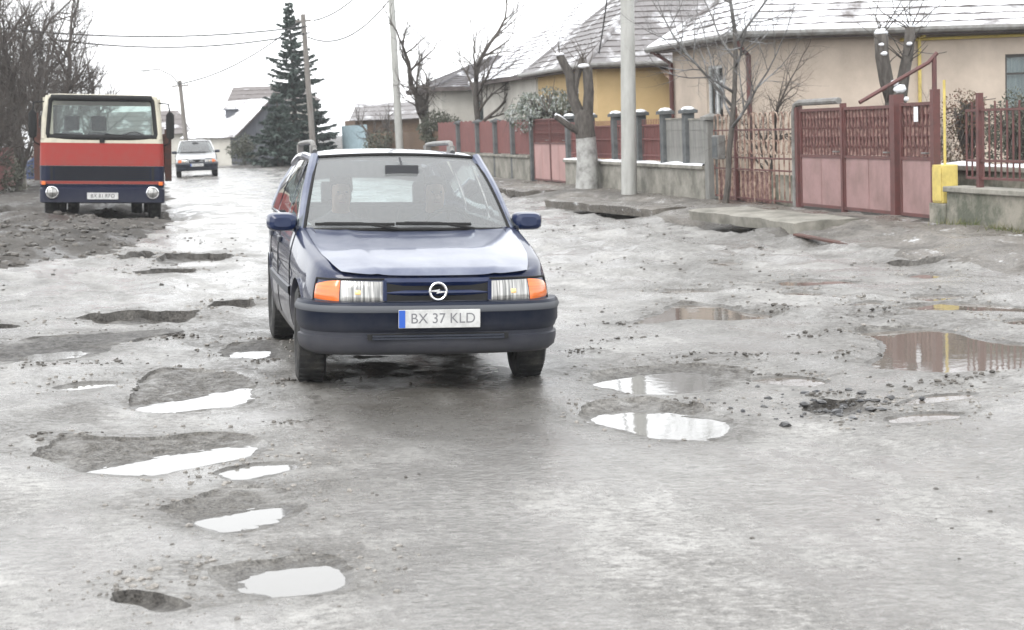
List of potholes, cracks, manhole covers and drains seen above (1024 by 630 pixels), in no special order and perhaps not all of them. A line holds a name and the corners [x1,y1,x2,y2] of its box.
pothole [155,253,234,265]
pothole [157,484,308,534]
pothole [581,362,755,395]
pothole [76,310,201,325]
pothole [213,461,305,481]
pothole [883,411,965,423]
pothole [128,367,259,414]
pothole [217,340,282,359]
pothole [853,325,1024,373]
pothole [207,554,357,598]
pothole [887,257,949,266]
pothole [110,590,191,612]
